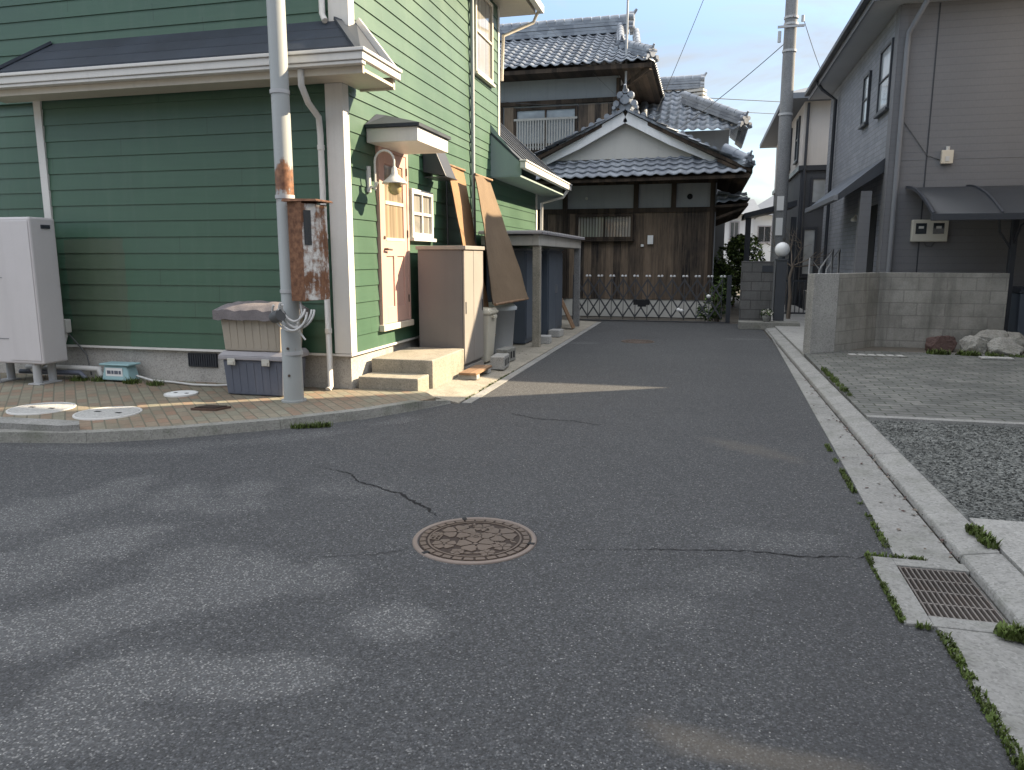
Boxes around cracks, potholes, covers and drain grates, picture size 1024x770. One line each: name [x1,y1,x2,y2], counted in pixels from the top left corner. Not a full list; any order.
utility cover [72,406,143,420]
crack [554,546,864,558]
manhole cover [412,517,537,565]
drain grate [870,556,1012,634]
crack [319,466,437,516]
utility cover [6,402,77,415]
